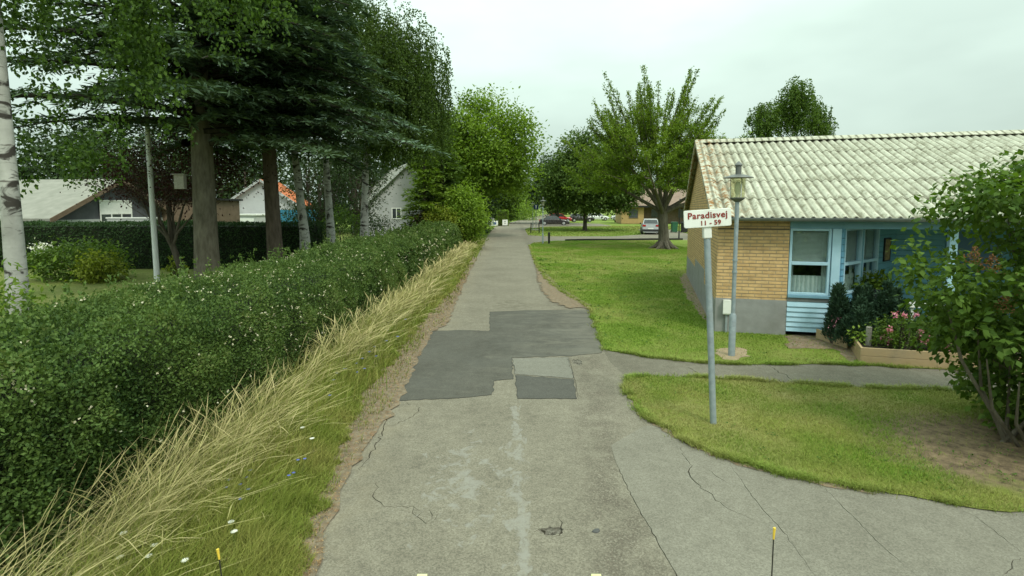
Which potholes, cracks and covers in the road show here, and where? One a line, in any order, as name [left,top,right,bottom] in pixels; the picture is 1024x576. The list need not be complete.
pothole [539,526,564,535]
crack [358,403,438,523]
crack [680,449,816,576]
